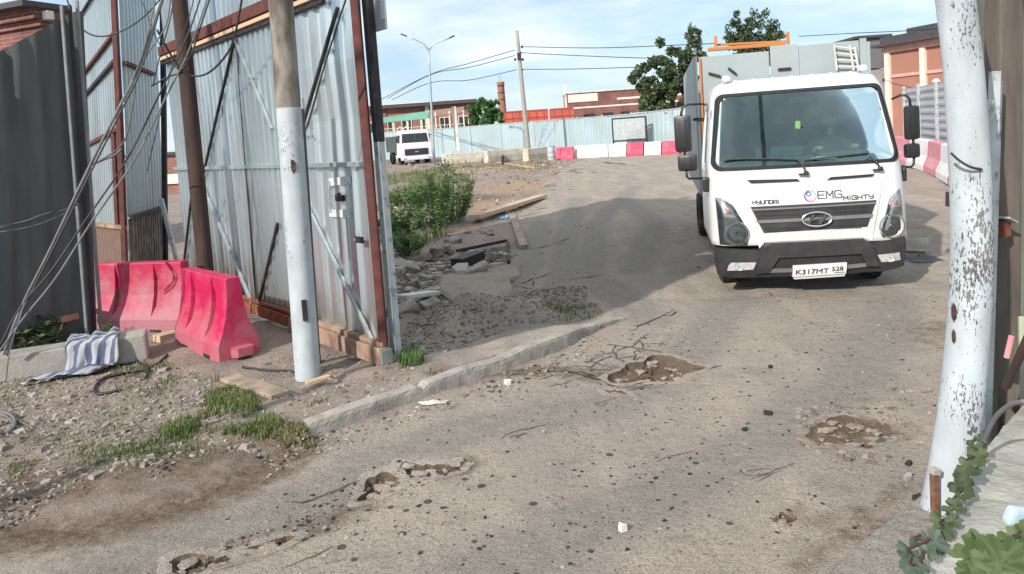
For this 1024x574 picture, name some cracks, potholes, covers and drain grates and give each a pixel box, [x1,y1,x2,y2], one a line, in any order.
pothole [599,352,714,386]
pothole [388,458,474,485]
pothole [156,546,262,574]
pothole [794,411,906,454]
pothole [347,466,409,508]
crack [284,481,358,503]
crack [539,309,677,405]
